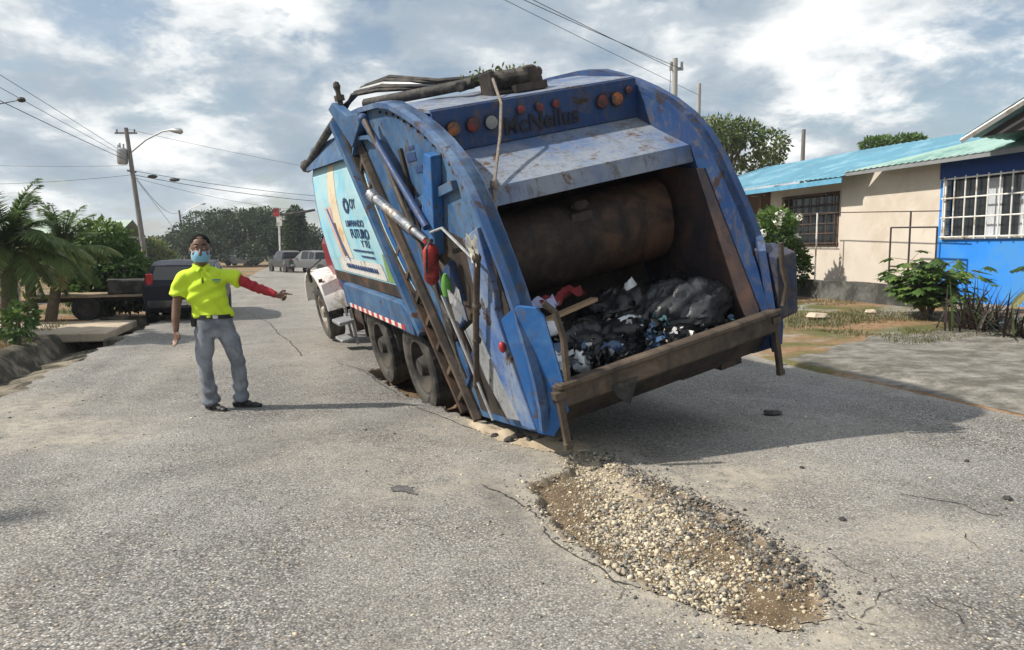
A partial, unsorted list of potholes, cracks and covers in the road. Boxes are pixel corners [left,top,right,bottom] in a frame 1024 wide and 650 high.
pothole [369,367,497,422]
crack [482,484,641,599]
crack [925,596,987,624]
crack [844,575,902,626]
pothole [526,451,829,631]
